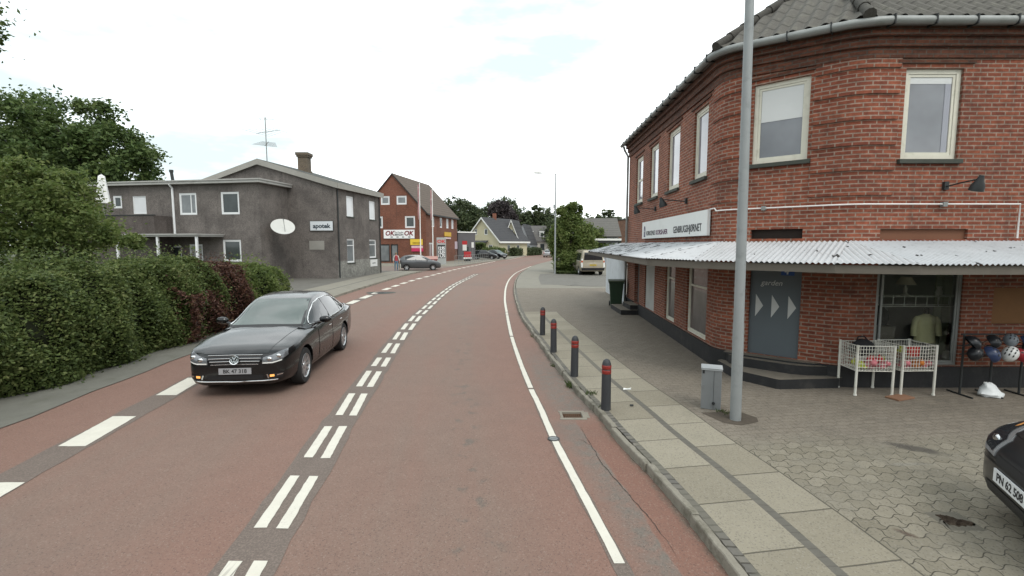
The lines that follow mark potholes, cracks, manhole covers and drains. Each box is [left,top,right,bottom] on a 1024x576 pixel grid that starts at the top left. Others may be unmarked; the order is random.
pothole [924,512,987,531]
drain grate [558,411,590,420]
crack [582,430,676,554]
